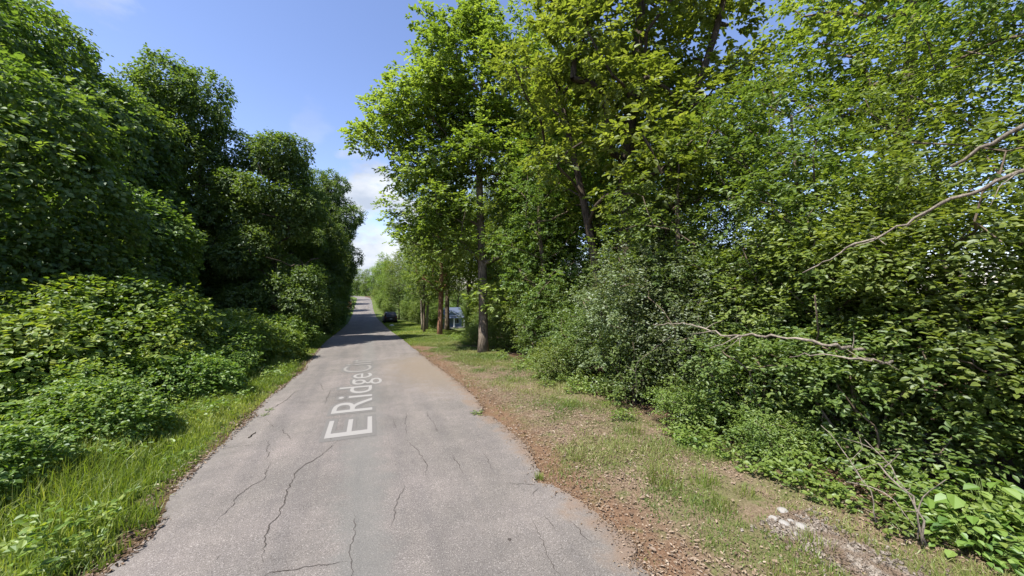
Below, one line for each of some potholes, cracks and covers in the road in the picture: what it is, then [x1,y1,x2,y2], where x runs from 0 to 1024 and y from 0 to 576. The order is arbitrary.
crack [261,446,356,576]
crack [217,398,291,520]
